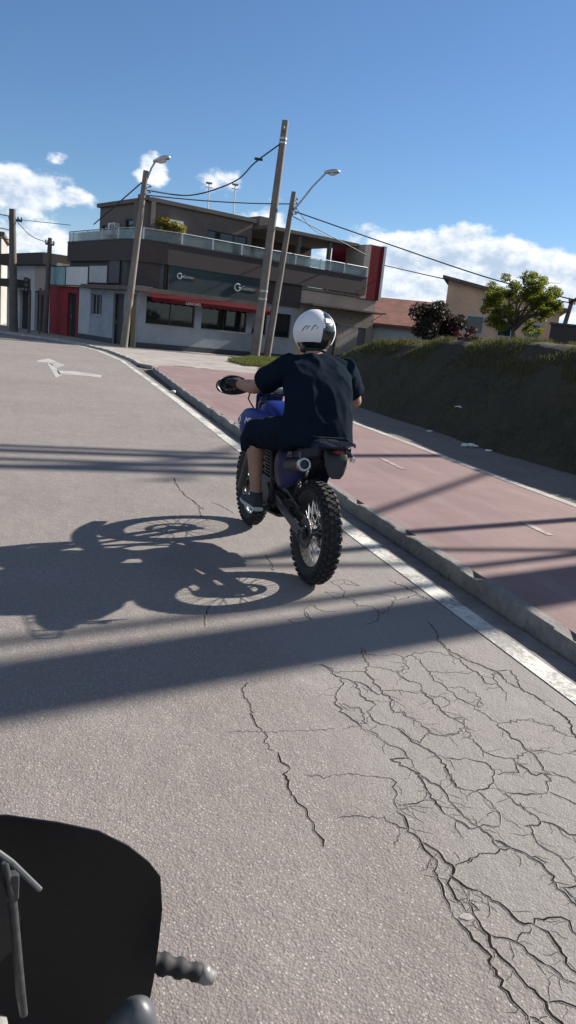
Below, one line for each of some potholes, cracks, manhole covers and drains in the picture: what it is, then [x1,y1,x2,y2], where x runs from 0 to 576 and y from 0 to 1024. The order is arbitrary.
crack [203,605,211,628]
crack [173,478,234,522]
crack [226,579,576,1024]
